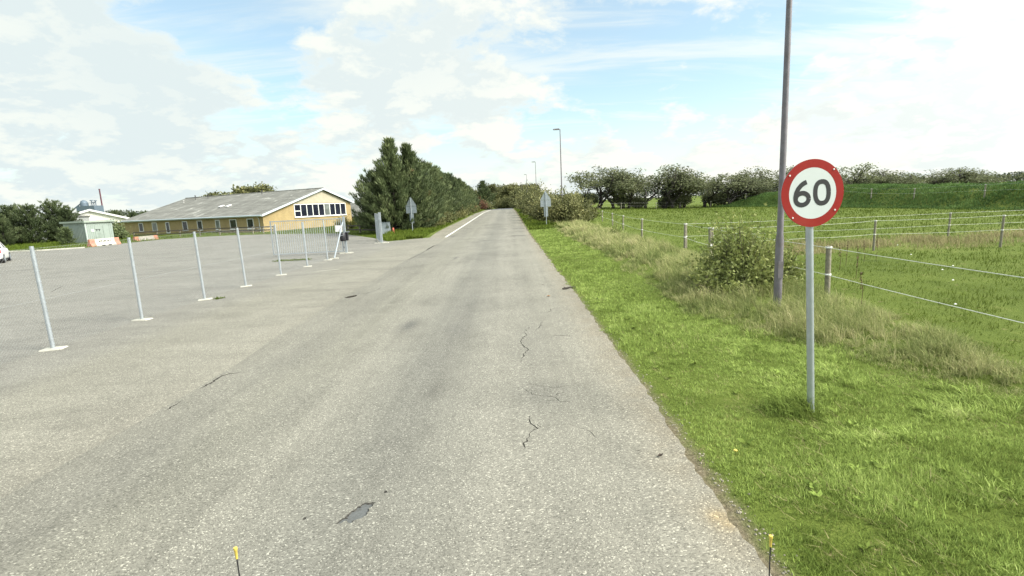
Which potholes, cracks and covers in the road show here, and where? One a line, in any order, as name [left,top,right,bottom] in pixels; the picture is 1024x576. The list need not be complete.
pothole [336,502,376,524]
crack [523,385,595,450]
